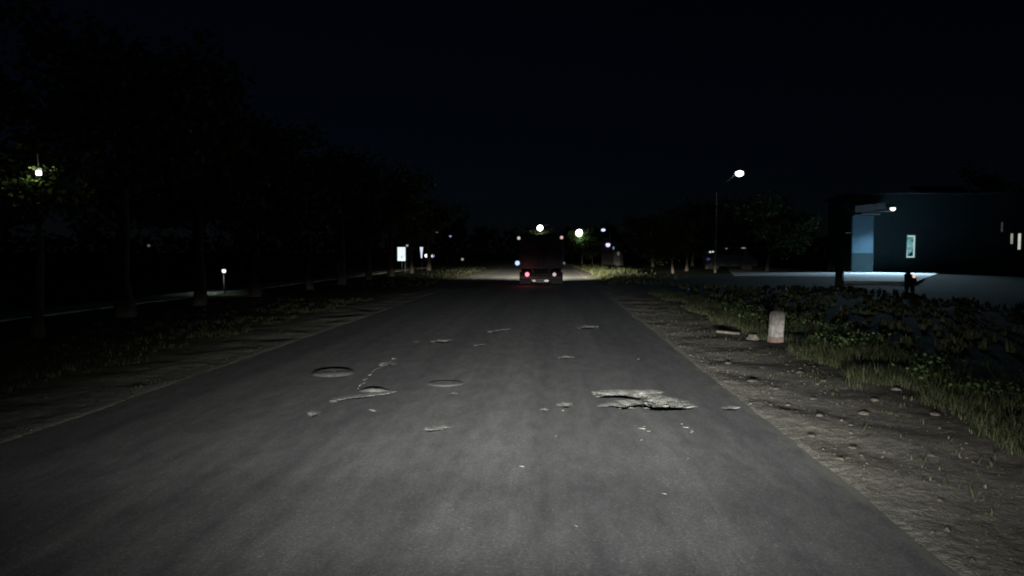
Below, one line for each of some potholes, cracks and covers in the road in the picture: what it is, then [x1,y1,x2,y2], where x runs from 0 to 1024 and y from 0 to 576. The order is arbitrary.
pothole [591,389,698,411]
pothole [329,388,398,403]
